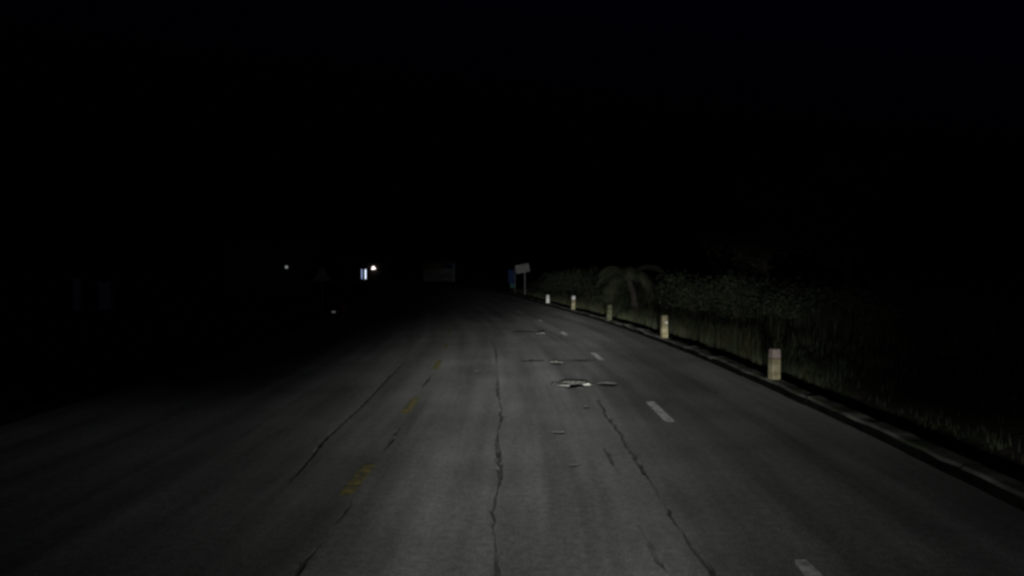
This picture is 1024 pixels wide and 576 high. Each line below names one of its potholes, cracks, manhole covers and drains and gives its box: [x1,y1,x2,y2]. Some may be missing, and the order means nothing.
crack [270,356,462,576]
crack [597,397,717,576]
pothole [550,381,595,389]
crack [489,331,537,576]
